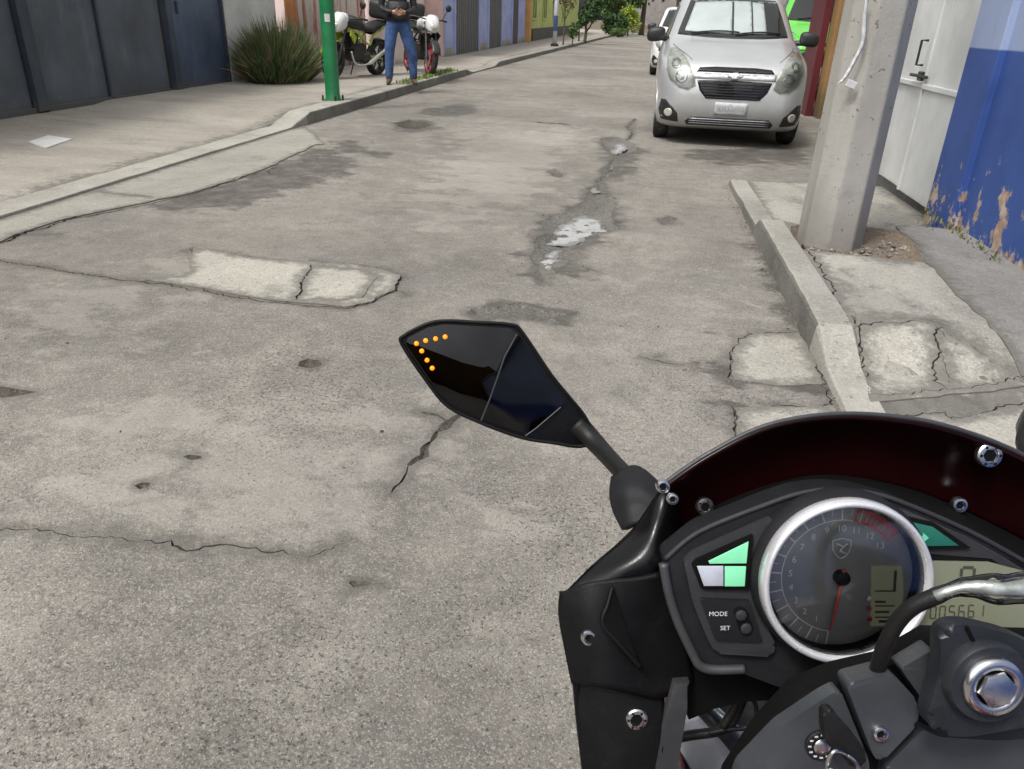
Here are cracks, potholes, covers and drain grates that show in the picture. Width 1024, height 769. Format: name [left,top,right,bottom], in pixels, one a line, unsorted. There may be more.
pothole [530,183,619,283]
crack [391,412,462,493]
crack [596,119,636,183]
pothole [0,387,35,397]
crack [727,332,833,407]
pothole [298,359,322,368]
